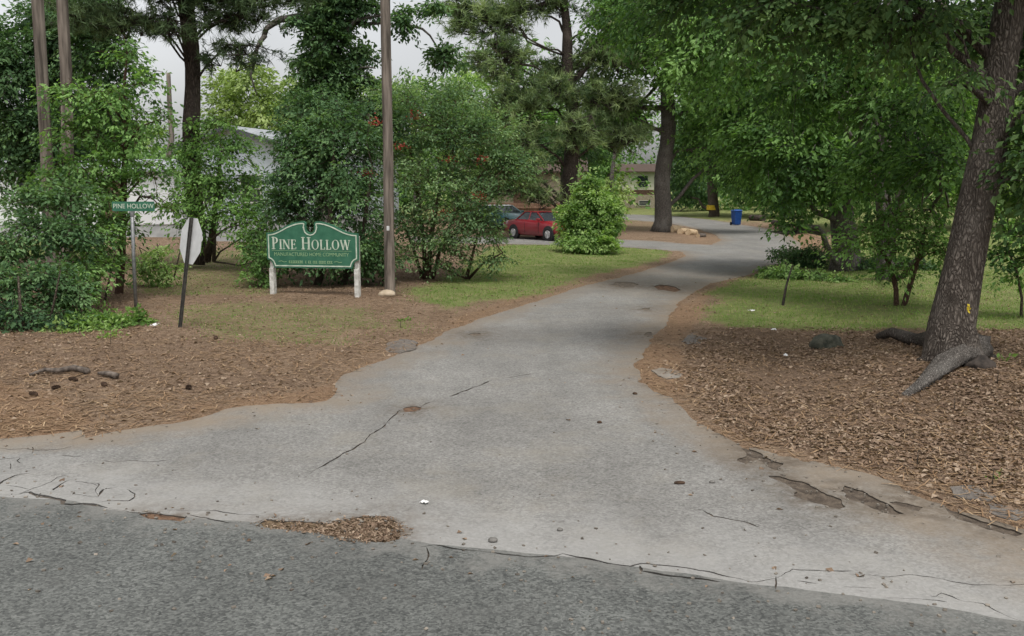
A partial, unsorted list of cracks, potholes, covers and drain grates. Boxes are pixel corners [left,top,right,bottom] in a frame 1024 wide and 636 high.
pothole [770,476,844,509]
pothole [842,486,903,515]
pothole [139,513,187,521]
crack [307,374,529,476]
pothole [261,516,399,542]
pothole [915,491,1022,536]
pothole [737,447,782,470]
pothole [890,502,923,511]
crack [422,545,744,582]
crack [758,569,1023,620]
crack [0,448,258,526]
